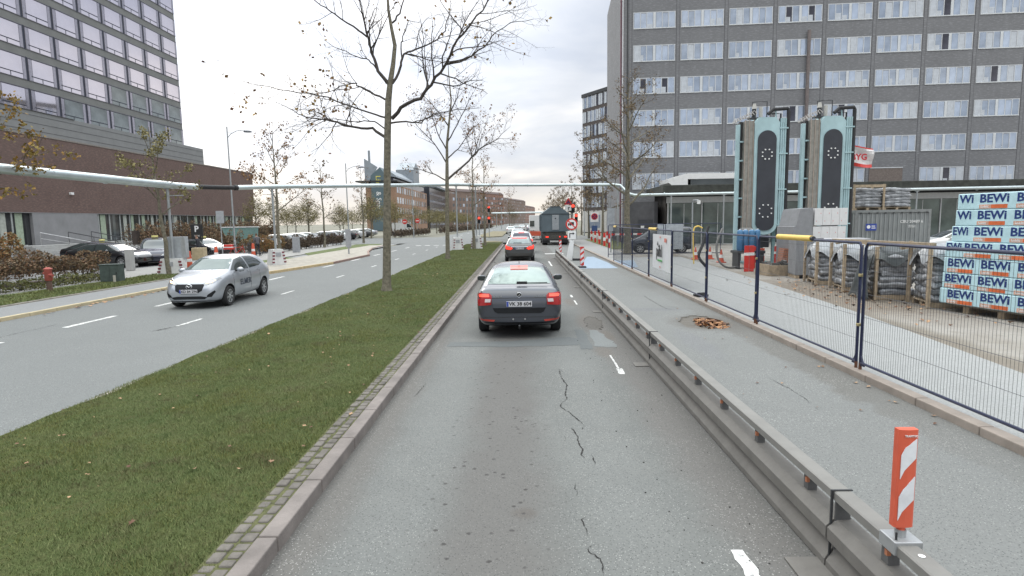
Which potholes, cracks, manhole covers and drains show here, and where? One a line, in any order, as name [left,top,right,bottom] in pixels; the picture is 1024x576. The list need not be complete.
crack [559,371,595,462]
pothole [678,315,728,329]
